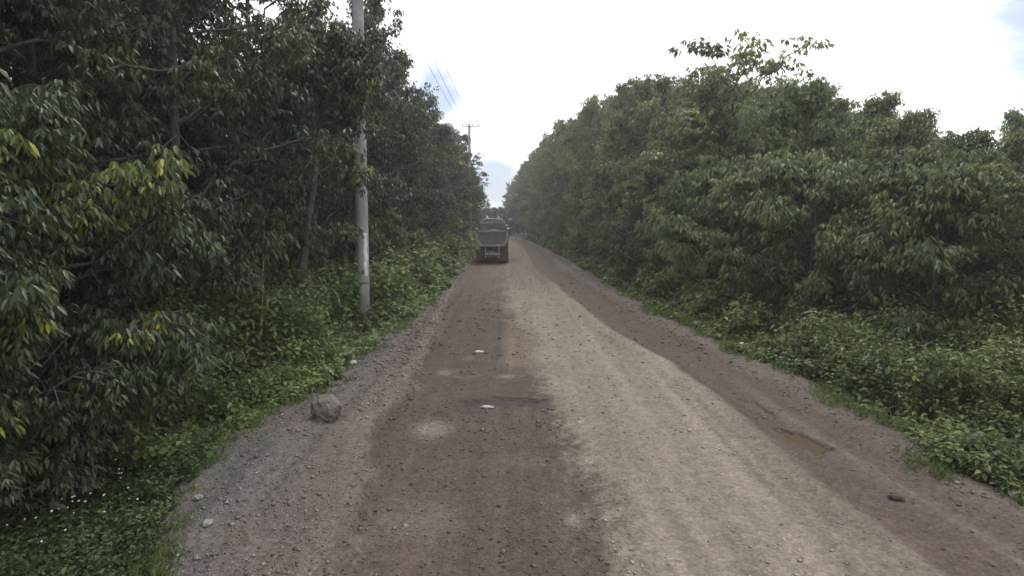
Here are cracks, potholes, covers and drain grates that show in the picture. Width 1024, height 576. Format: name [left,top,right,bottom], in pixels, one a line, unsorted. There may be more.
pothole [445,396,563,407]
pothole [766,424,844,459]
